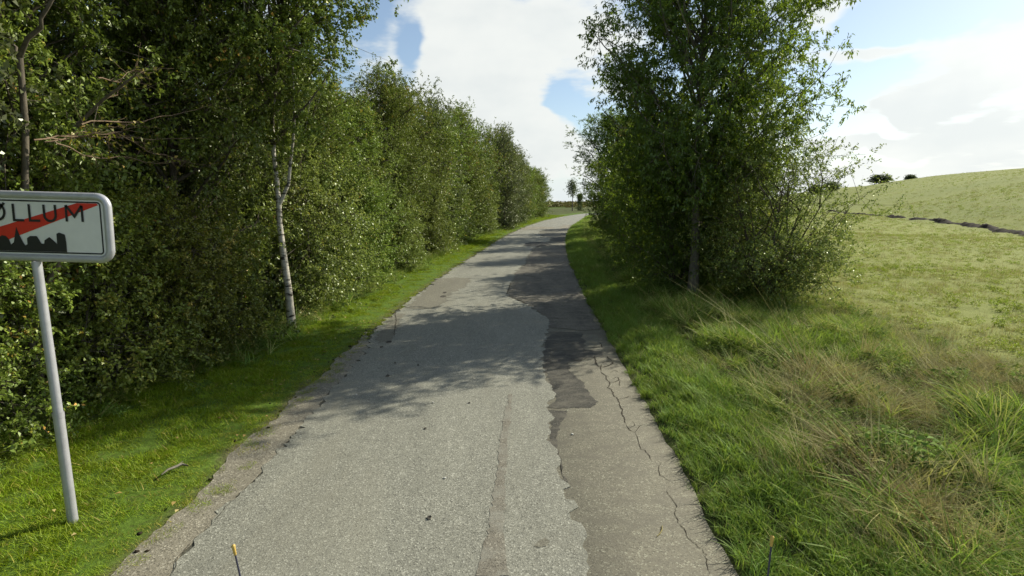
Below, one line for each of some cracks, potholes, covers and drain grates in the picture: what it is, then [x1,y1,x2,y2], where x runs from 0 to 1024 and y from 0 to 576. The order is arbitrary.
crack [568,343,709,570]
